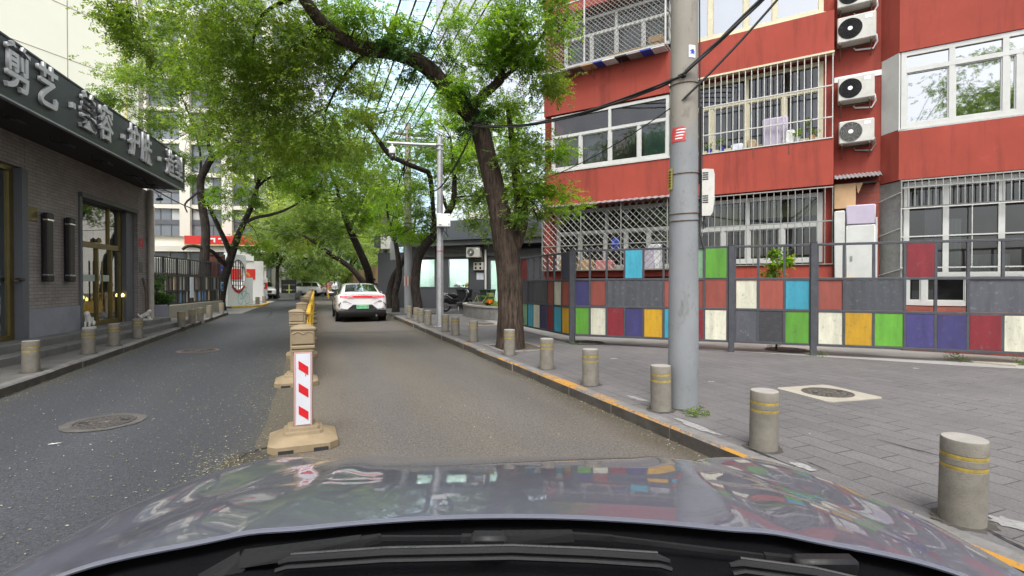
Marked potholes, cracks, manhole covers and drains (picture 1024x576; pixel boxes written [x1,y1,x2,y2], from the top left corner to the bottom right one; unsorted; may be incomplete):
manhole cover [59,413,147,432]
manhole cover [778,385,882,403]
